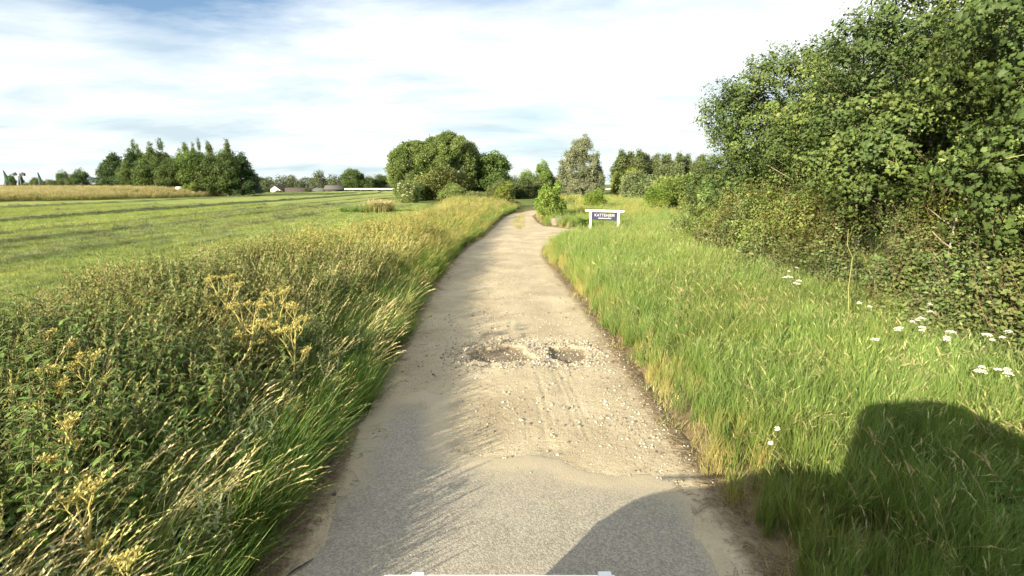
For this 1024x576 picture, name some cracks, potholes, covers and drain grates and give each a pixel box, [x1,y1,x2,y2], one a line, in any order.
pothole [541,344,594,367]
pothole [456,342,553,366]
